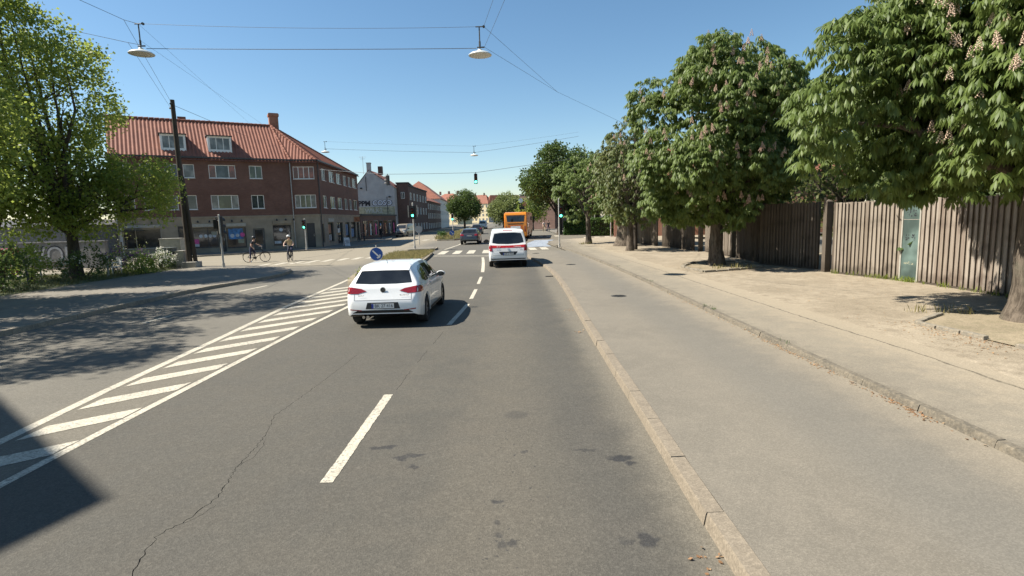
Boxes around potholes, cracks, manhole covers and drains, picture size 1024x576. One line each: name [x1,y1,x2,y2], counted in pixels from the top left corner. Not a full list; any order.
crack [132,355,357,576]
